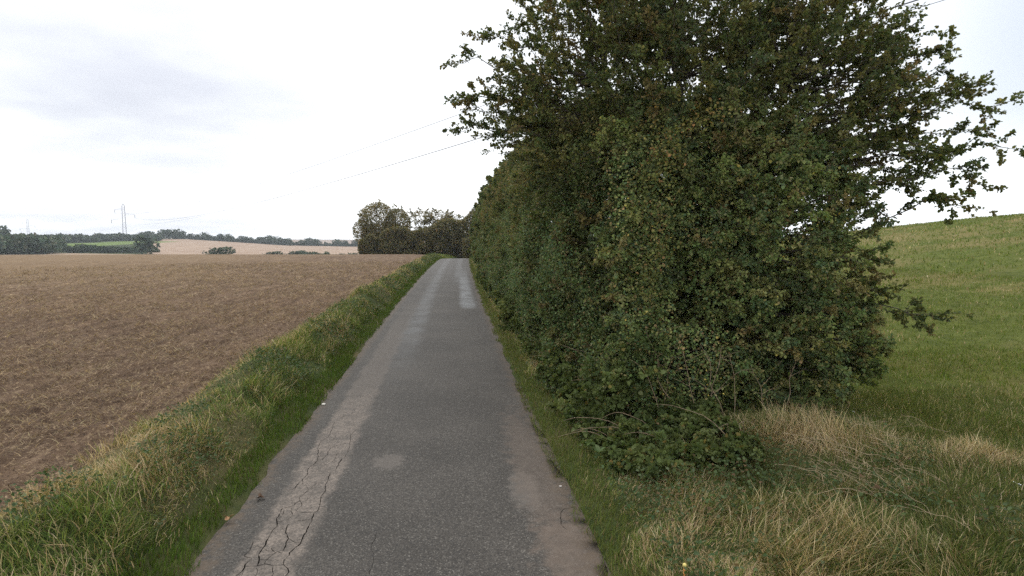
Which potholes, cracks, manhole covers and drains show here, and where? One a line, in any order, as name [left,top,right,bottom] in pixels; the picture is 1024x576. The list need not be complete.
crack [236,396,361,576]
